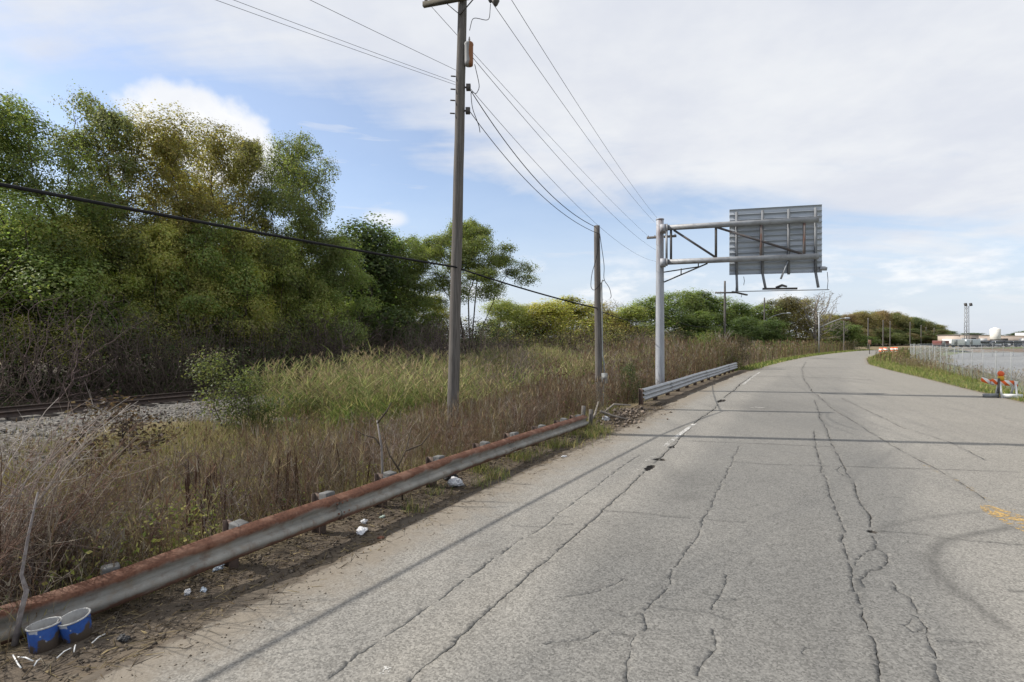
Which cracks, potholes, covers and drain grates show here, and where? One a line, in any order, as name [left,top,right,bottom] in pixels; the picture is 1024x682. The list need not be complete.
crack [412,376,1004,681]
